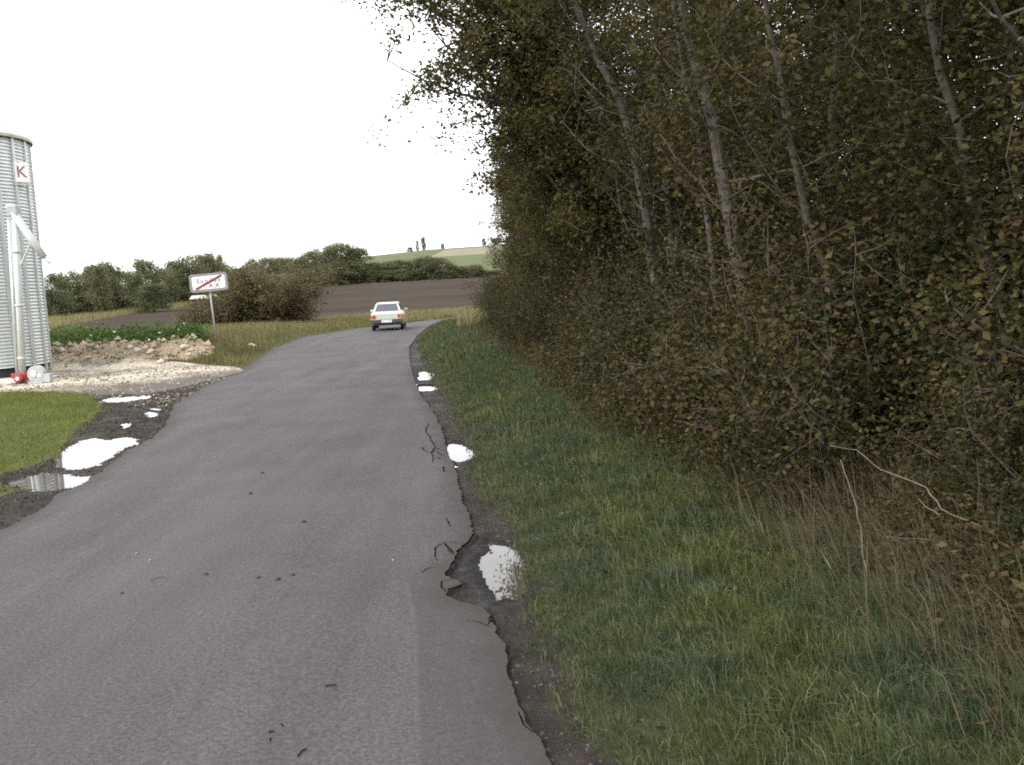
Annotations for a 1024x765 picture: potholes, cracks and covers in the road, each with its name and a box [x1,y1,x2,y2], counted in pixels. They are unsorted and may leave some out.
pothole [417,384,444,396]
pothole [444,437,479,467]
crack [422,426,445,472]
pothole [445,533,537,615]
crack [421,518,455,592]
pothole [413,370,437,384]
crack [470,608,496,626]
